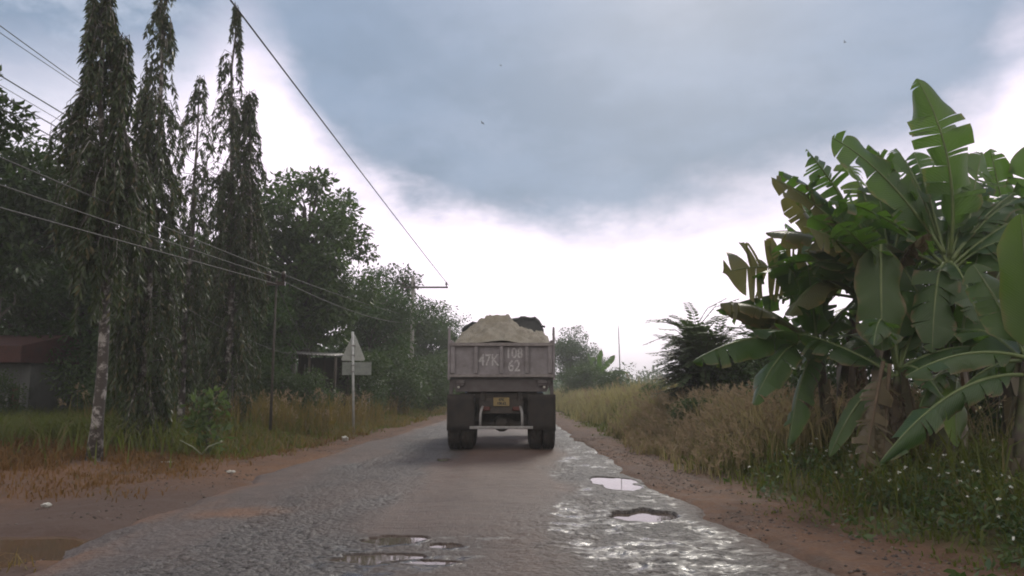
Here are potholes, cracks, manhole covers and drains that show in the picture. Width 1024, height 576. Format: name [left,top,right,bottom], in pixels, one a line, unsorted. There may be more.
pothole [320,551,434,567]
pothole [352,534,436,547]
pothole [603,507,685,524]
pothole [380,558,469,567]
pothole [587,476,646,491]
pothole [420,542,470,550]
